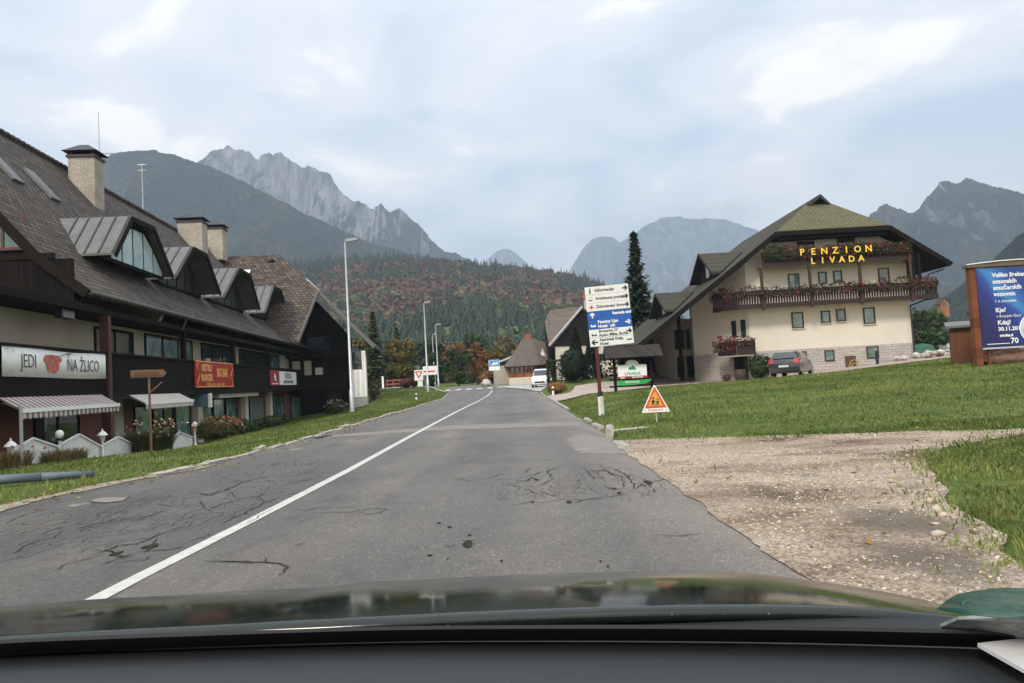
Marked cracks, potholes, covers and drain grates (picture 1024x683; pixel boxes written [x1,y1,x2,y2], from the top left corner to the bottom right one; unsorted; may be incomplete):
crack [2,436,412,570]
crack [205,543,303,575]
crack [459,464,675,505]
